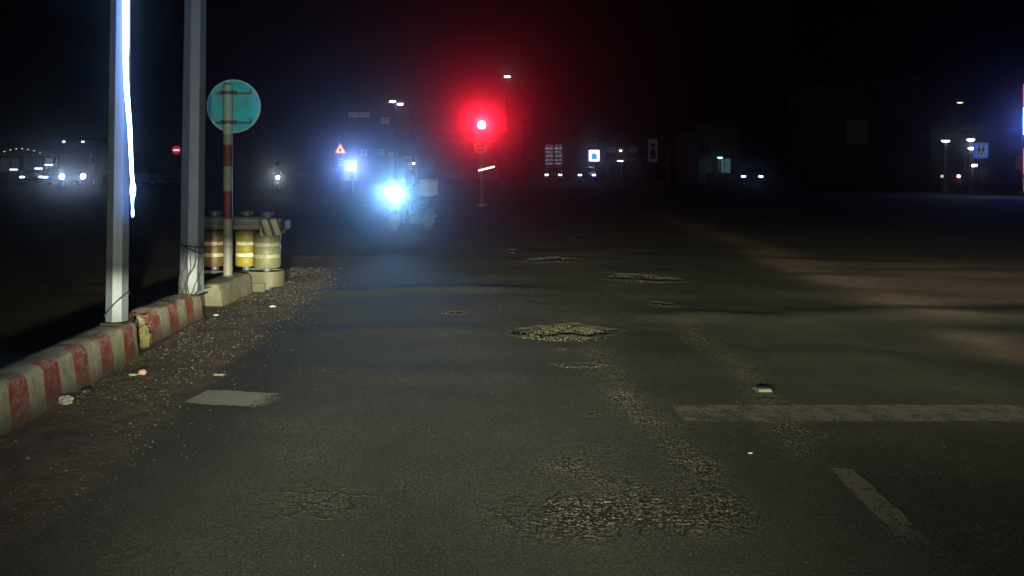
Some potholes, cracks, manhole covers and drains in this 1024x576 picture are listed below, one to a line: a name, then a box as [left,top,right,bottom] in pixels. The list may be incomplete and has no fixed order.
pothole [505,321,629,342]
pothole [597,272,692,283]
crack [486,489,723,539]
crack [252,484,377,520]
